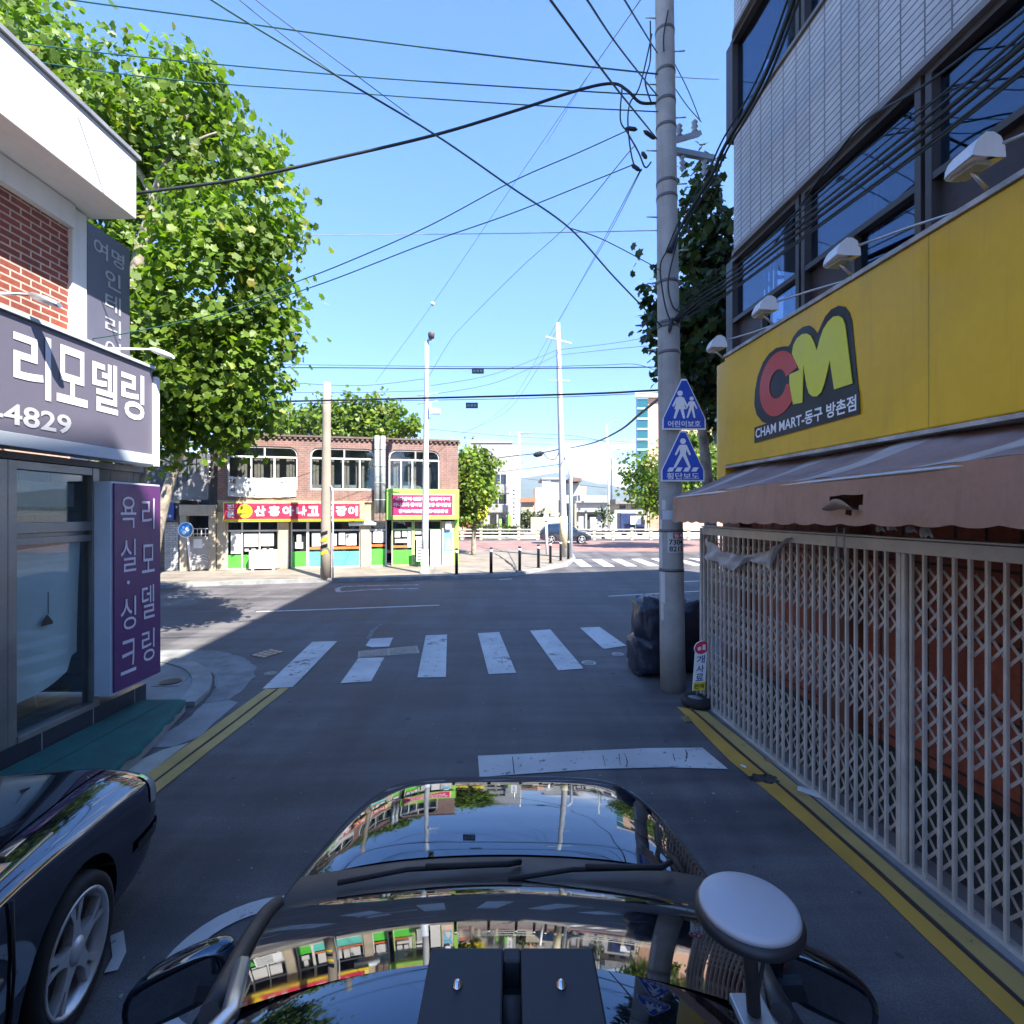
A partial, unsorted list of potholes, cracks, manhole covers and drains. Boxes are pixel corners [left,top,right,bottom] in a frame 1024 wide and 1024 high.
drain grate [250,649,284,658]
utility cover [152,676,190,686]
